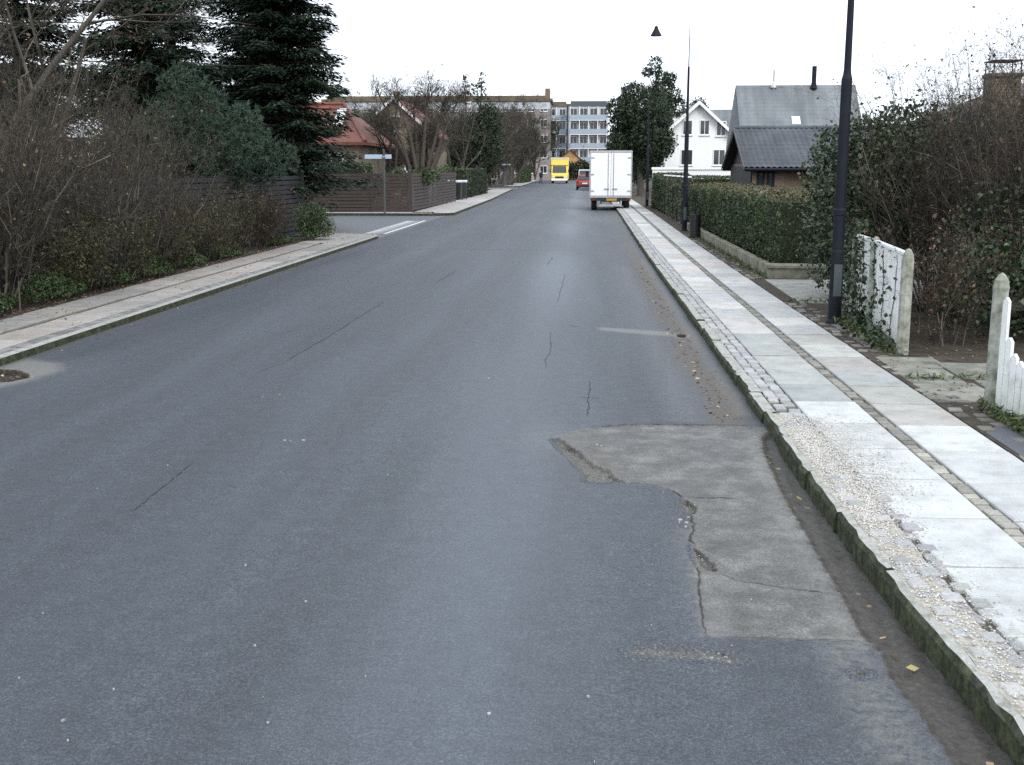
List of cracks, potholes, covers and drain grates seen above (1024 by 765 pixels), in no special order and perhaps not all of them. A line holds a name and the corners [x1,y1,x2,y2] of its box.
crack [587,381,719,427]
crack [697,567,861,642]
